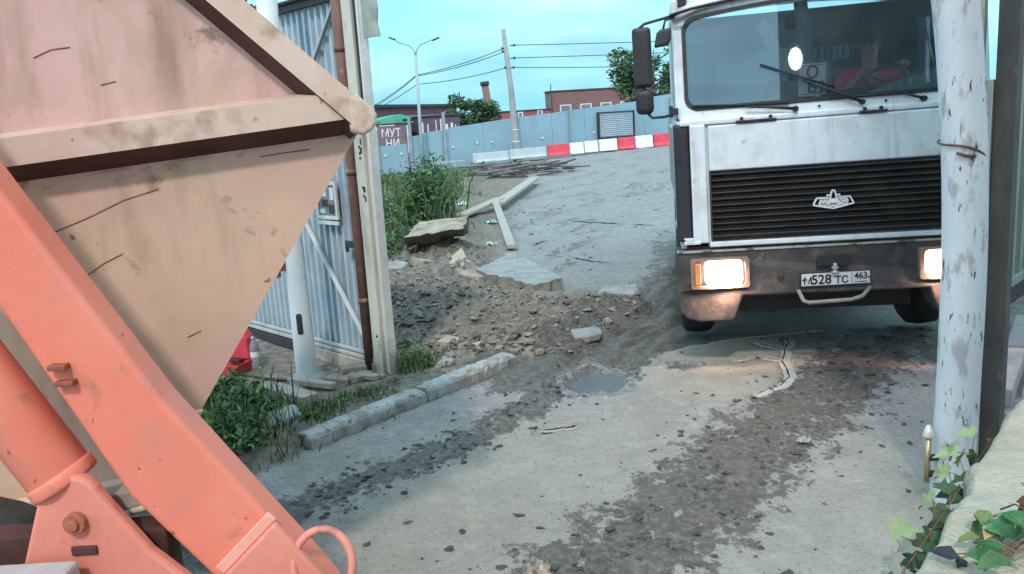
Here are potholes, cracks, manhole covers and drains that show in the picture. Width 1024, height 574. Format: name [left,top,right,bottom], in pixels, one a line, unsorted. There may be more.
pothole [556,361,639,397]
crack [669,330,828,397]
